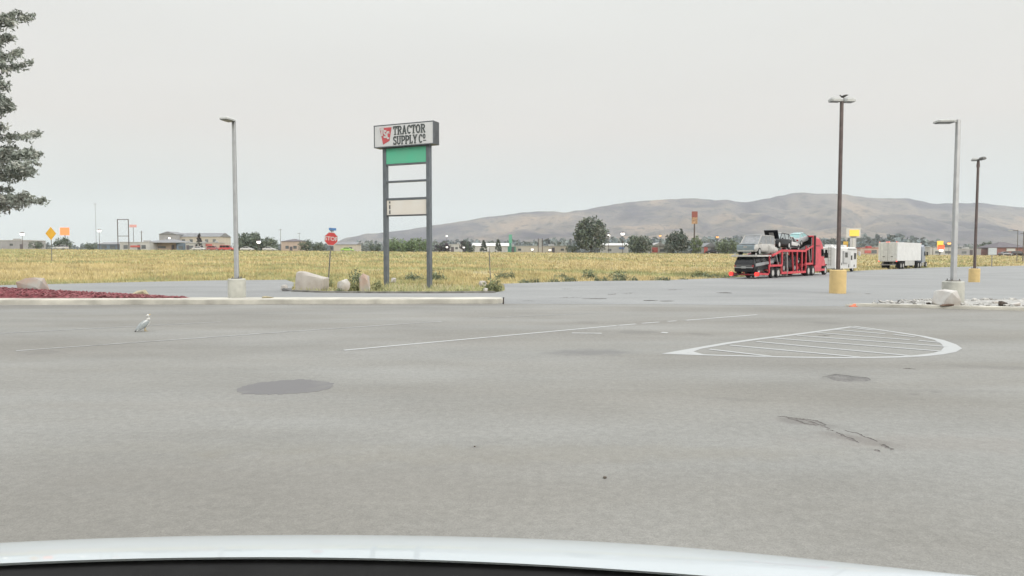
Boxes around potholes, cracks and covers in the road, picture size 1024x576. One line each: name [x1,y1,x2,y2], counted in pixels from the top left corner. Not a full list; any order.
crack [780,416,894,452]
